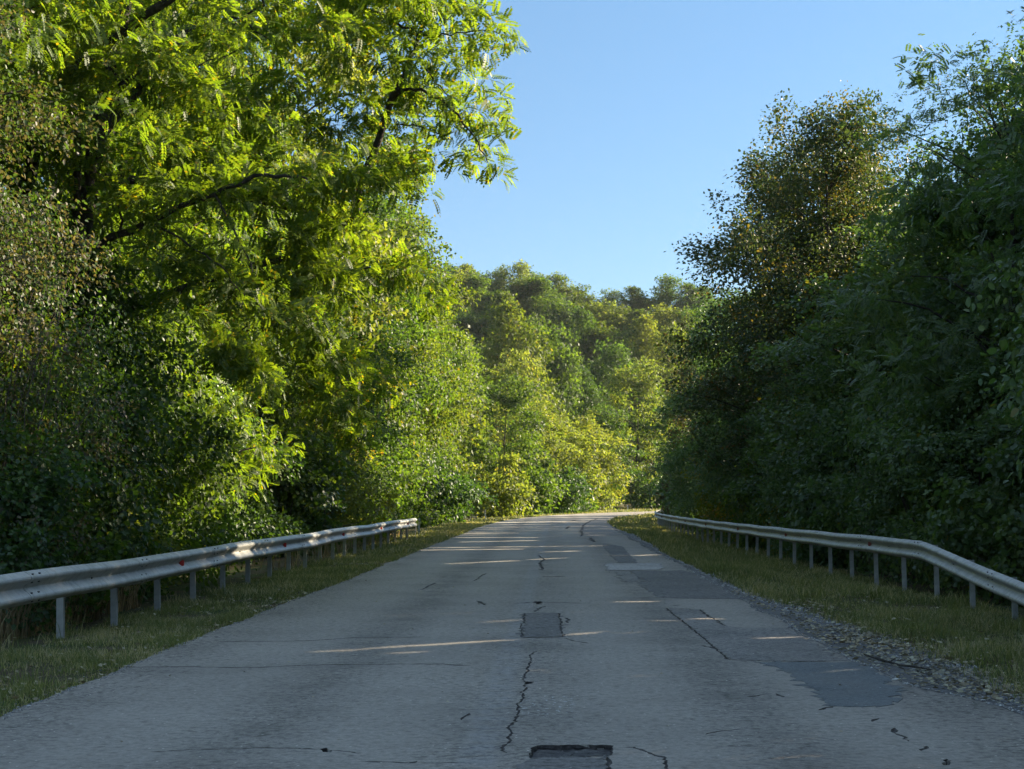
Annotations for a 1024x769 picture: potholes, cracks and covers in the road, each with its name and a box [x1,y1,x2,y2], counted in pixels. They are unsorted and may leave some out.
crack [156,602,587,763]
crack [605,747,668,769]
crack [538,555,562,577]
crack [871,718,929,751]
